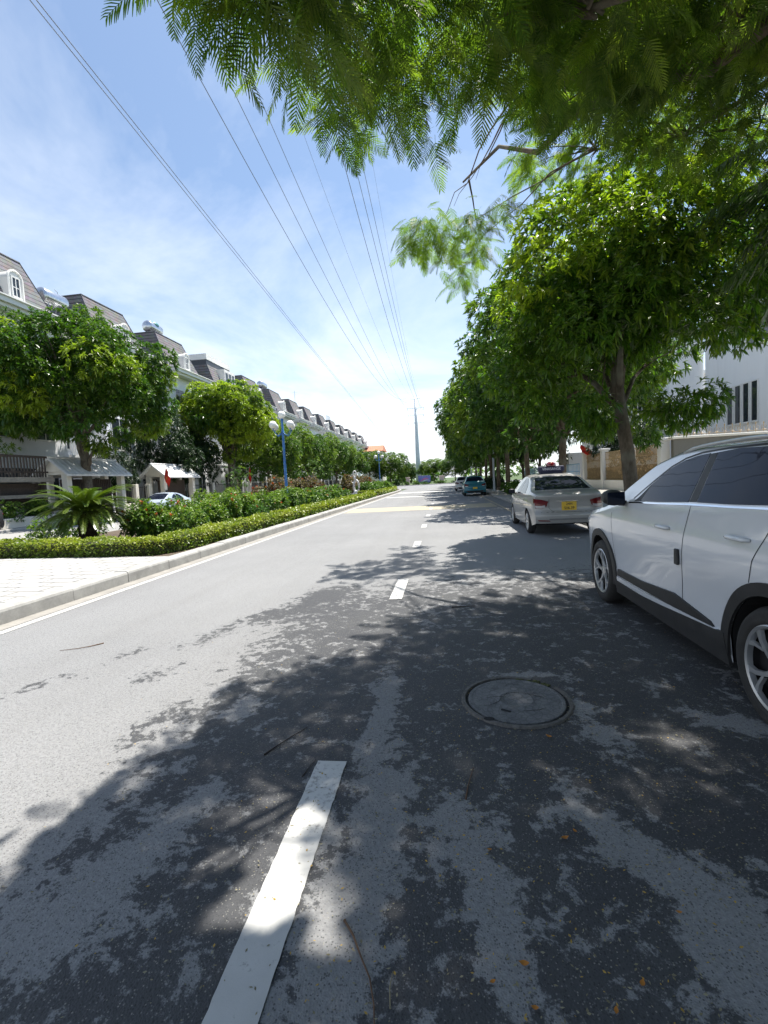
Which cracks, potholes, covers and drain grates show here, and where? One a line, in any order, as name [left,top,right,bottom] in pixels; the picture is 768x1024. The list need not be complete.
manhole cover [461,676,575,730]
